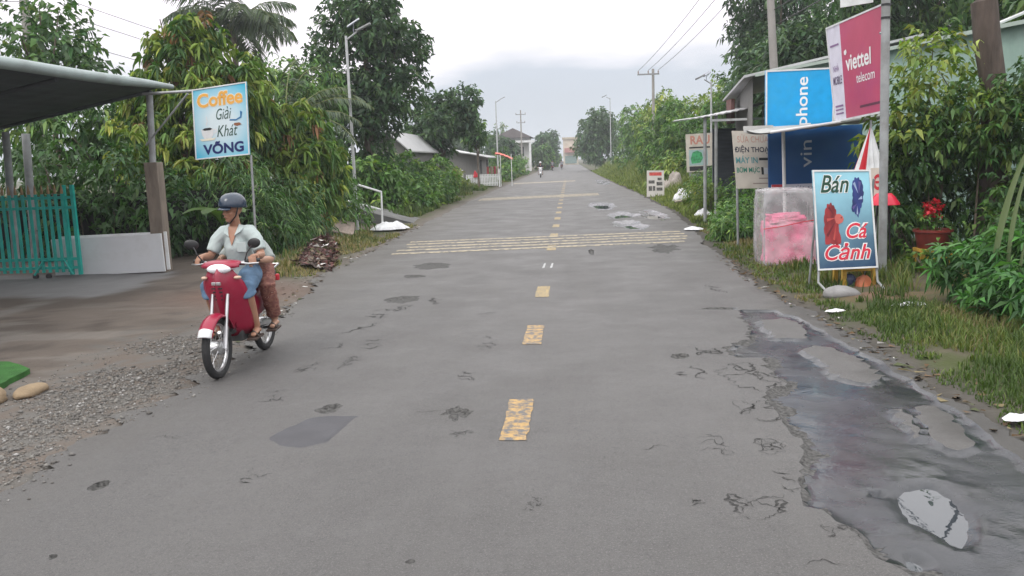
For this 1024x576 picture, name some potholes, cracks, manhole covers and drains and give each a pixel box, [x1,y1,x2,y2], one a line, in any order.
pothole [638,209,670,221]
pothole [612,220,650,230]
pothole [607,211,643,219]
pothole [696,307,1024,576]
pothole [588,202,617,210]
crack [676,347,786,454]
crack [724,471,802,518]
pothole [314,403,343,414]
pothole [87,480,111,491]
crack [294,305,410,372]
